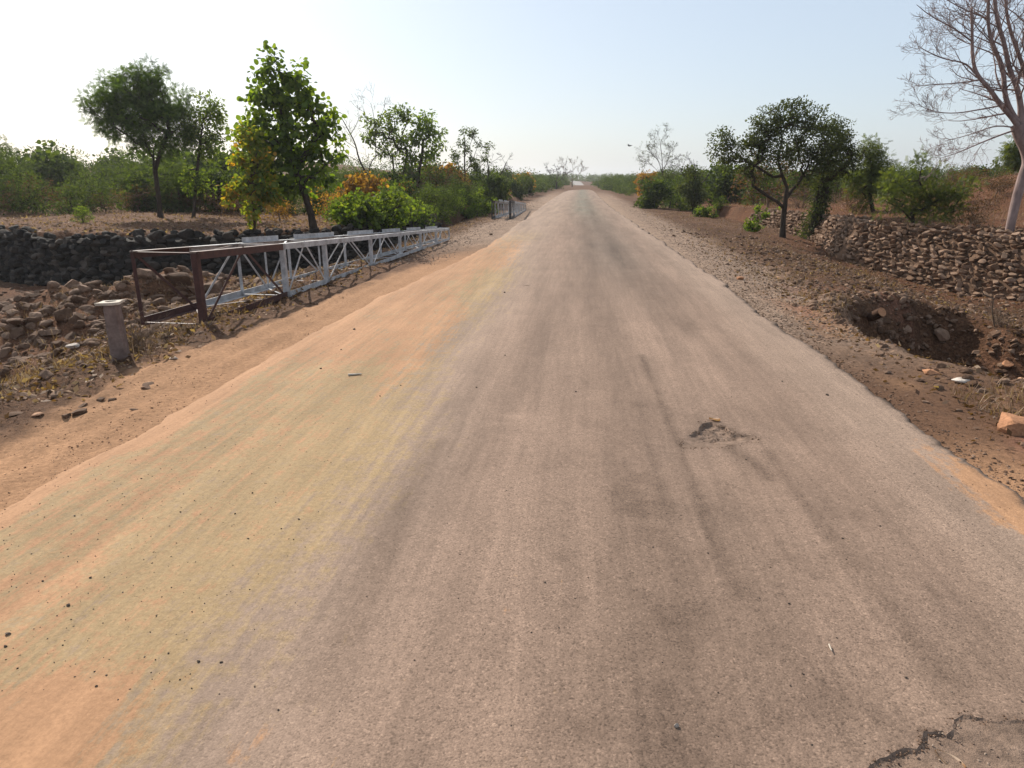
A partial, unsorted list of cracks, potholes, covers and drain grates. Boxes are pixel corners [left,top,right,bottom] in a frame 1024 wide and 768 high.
pothole [679,421,761,450]
